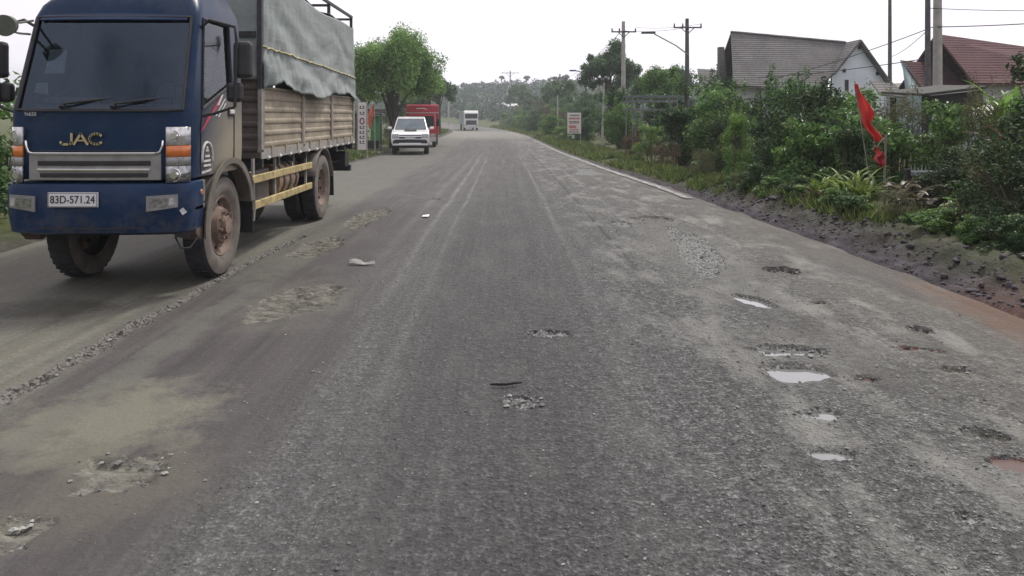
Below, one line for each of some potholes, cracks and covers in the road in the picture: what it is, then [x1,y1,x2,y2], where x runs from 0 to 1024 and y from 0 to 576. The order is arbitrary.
pothole [802,446,864,461]
pothole [934,364,973,374]
pothole [761,266,809,275]
pothole [850,373,882,383]
pothole [956,424,1016,443]
pothole [886,345,948,353]
pothole [522,329,574,338]
pothole [792,405,846,422]
pothole [982,449,1024,467]
pothole [751,357,849,384]
pothole [61,448,178,498]
pothole [740,342,832,357]
